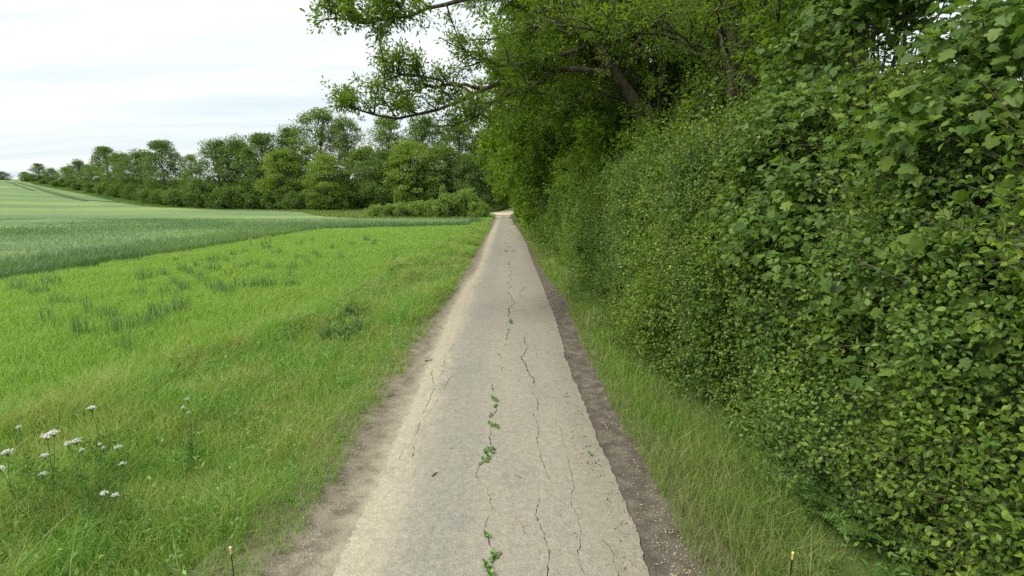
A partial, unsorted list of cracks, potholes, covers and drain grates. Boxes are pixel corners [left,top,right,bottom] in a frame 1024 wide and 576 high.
crack [399,346,453,459]
crack [521,337,585,576]
crack [476,274,525,560]
